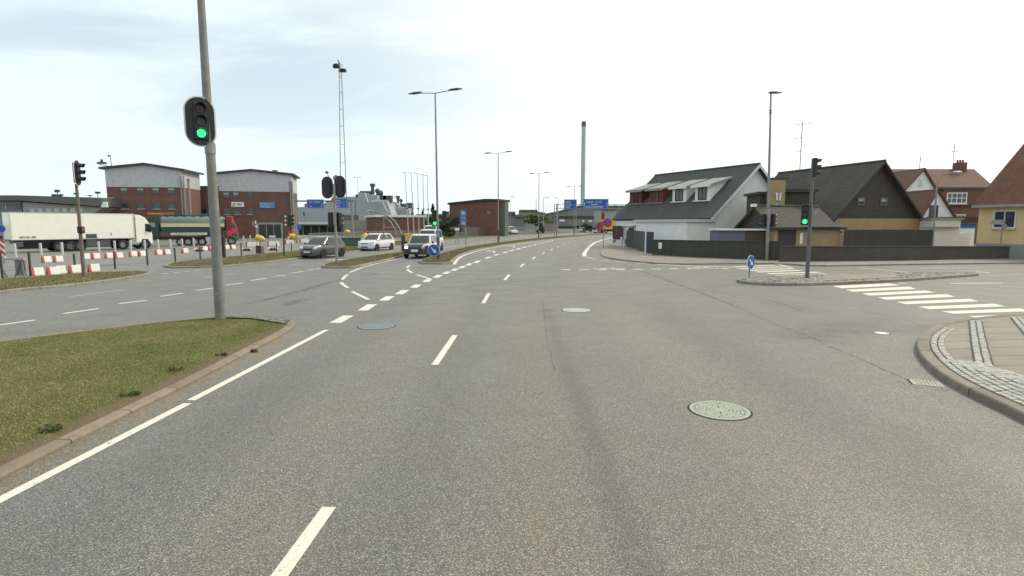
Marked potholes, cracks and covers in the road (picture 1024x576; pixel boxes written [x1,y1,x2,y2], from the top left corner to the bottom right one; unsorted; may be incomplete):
manhole cover [687,401,753,421]
drain grate [903,378,945,388]
